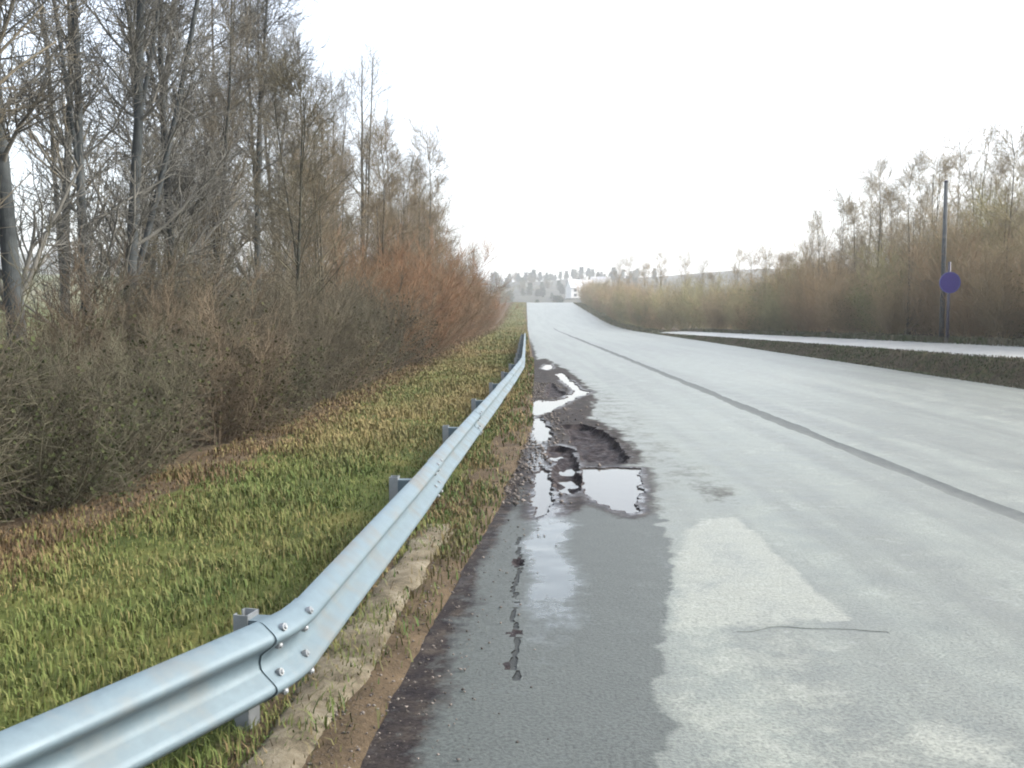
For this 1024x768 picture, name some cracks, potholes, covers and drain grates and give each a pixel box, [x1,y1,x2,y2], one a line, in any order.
pothole [541,445,584,495]
pothole [532,373,592,416]
pothole [559,424,630,465]
pothole [579,467,646,513]
